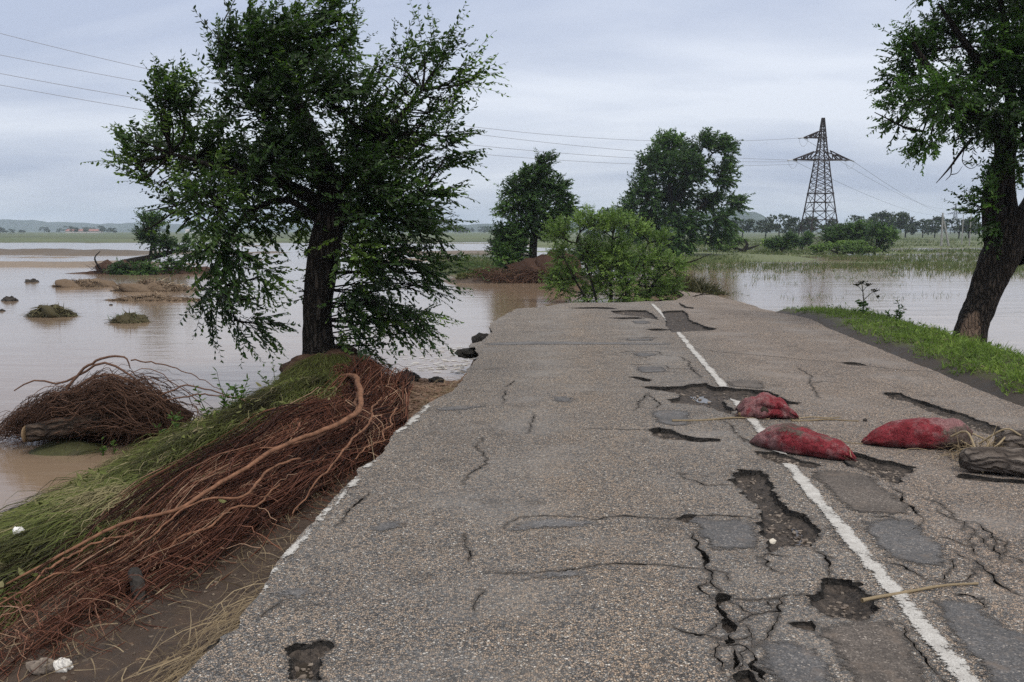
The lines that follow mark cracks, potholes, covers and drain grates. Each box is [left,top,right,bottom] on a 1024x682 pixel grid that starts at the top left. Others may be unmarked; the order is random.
pothole [724,469,825,555]
pothole [884,392,1005,435]
pothole [648,427,727,444]
pothole [802,575,884,623]
pothole [645,382,799,414]
pothole [661,310,716,332]
pothole [276,639,338,682]
crack [874,490,1022,608]
crack [524,534,783,682]
crack [507,515,751,523]
